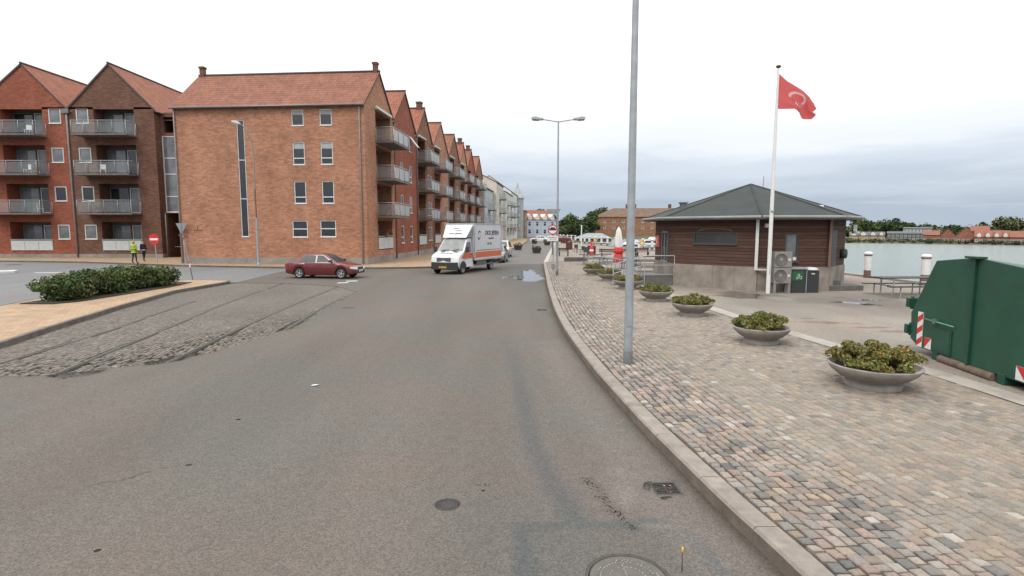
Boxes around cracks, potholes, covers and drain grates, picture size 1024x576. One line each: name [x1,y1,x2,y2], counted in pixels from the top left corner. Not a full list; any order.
drain grate [649,482,682,495]
manhole cover [434,499,461,511]
crack [576,477,636,531]
manhole cover [585,554,669,576]
